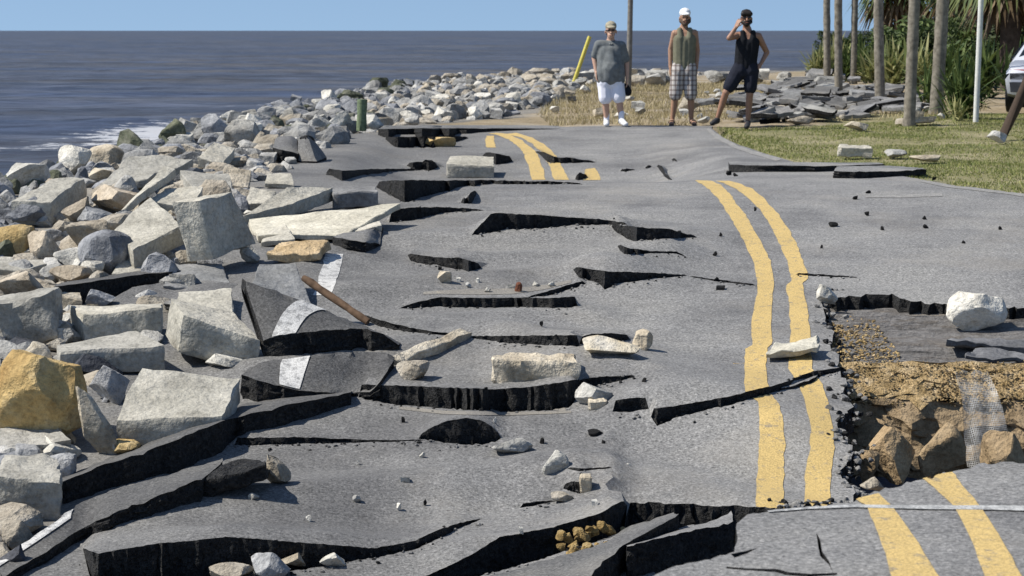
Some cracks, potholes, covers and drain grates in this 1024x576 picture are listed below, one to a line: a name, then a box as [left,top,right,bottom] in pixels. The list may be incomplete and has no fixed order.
crack [83,467,627,576]
crack [235,367,846,446]
crack [326,136,755,335]
pothole [733,308,1024,479]
